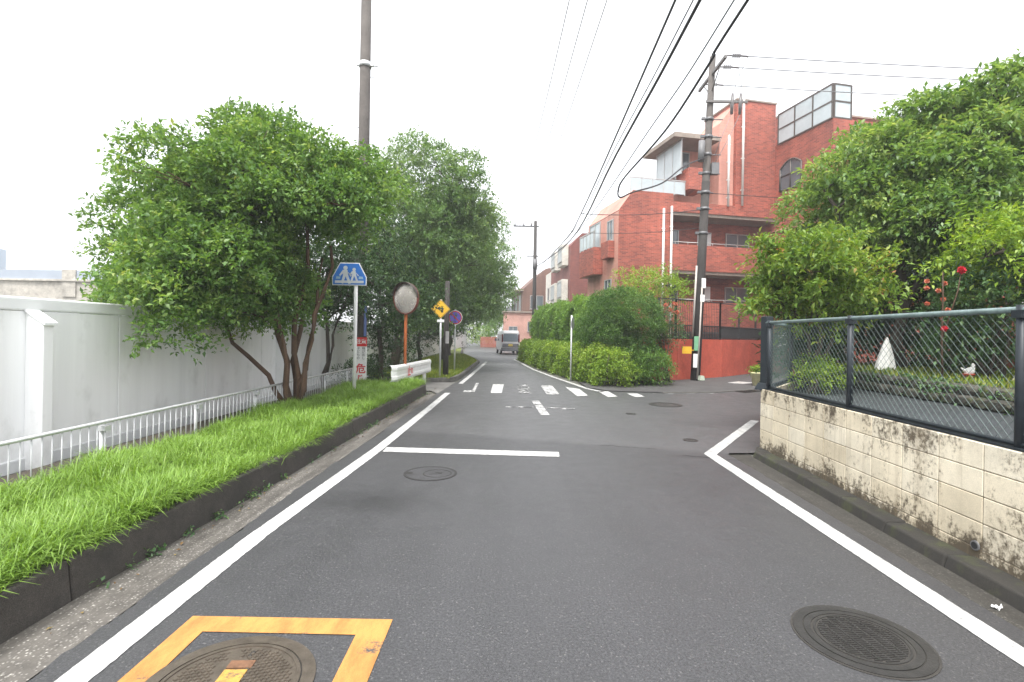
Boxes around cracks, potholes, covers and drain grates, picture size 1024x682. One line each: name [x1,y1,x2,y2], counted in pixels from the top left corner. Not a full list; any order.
manhole cover [145,636,316,682]
manhole cover [790,605,942,681]
manhole cover [403,466,457,481]
